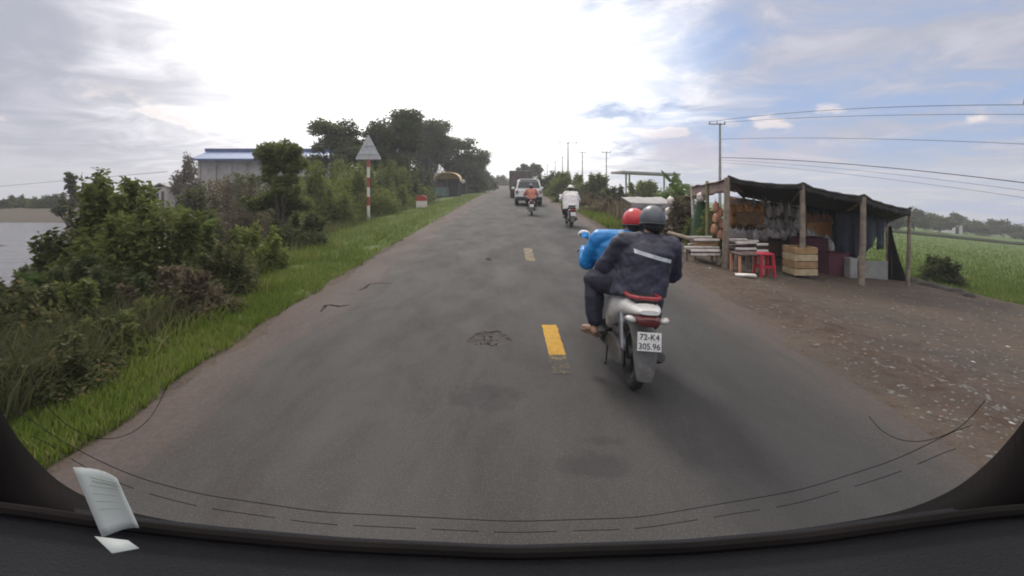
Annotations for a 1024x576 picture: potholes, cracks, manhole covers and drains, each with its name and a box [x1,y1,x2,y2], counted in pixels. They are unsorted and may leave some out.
pothole [467,330,512,346]
crack [320,283,383,312]
